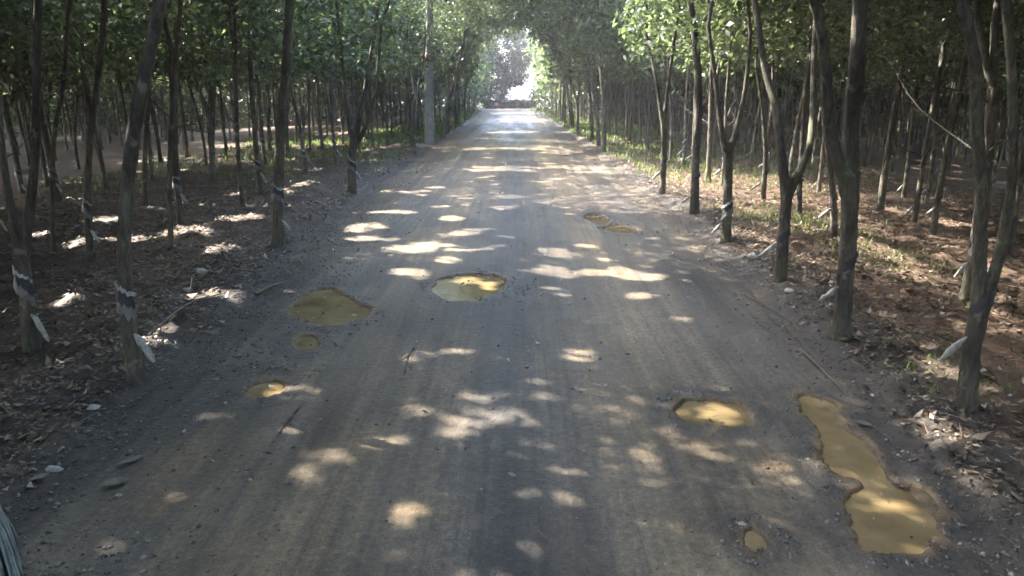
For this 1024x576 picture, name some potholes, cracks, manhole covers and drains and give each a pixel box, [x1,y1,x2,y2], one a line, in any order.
pothole [572,212,621,225]
pothole [415,270,521,306]
pothole [593,223,651,235]
pothole [647,388,780,439]
pothole [770,385,978,576]
pothole [271,284,390,332]
